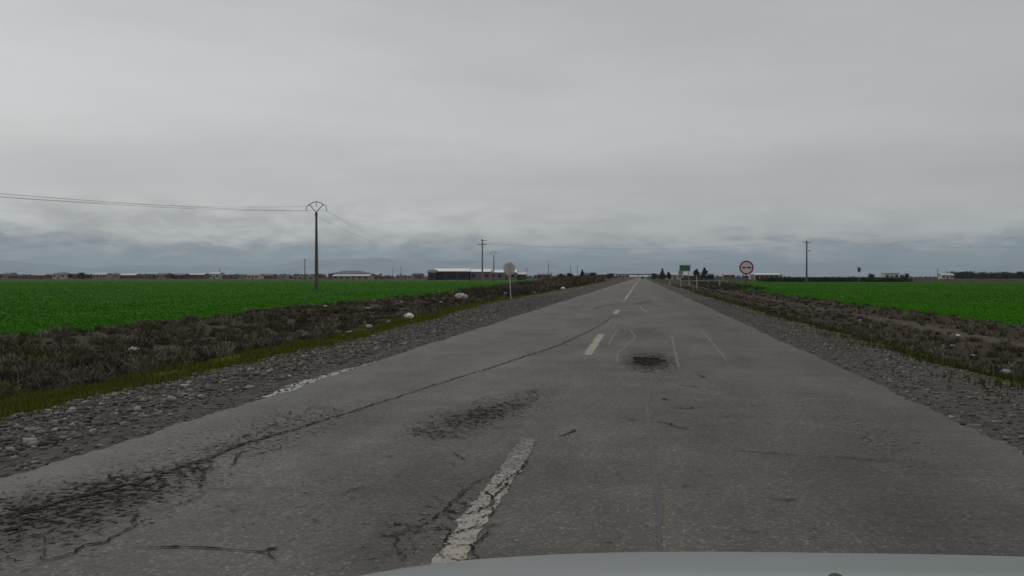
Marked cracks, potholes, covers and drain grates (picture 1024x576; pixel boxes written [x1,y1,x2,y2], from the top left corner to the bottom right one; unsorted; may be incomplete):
crack [0,317,613,569]
pothole [633,357,665,366]
